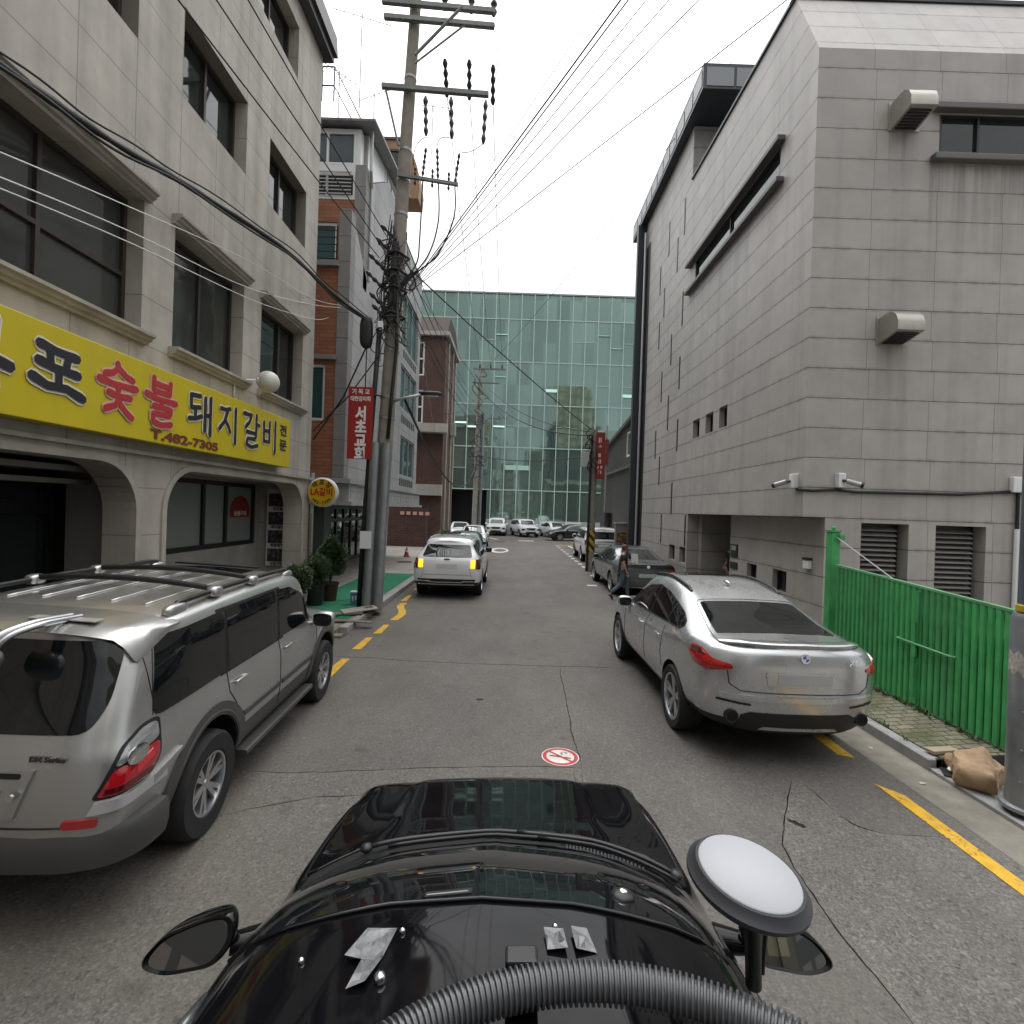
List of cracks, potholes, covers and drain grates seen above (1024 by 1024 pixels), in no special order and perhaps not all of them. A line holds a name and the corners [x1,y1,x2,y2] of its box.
crack [231,795,352,814]
crack [260,656,607,781]
crack [781,780,933,1024]
